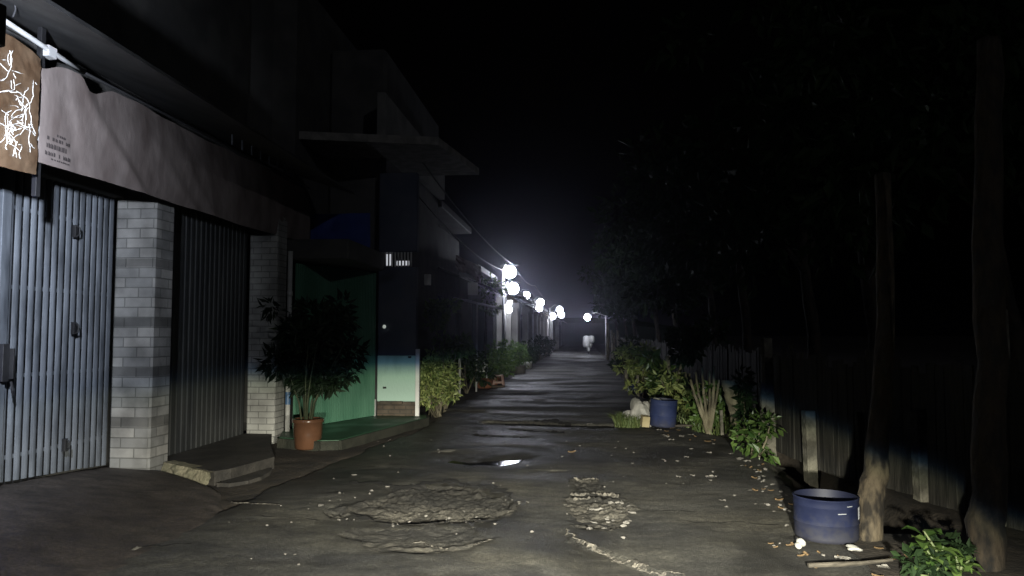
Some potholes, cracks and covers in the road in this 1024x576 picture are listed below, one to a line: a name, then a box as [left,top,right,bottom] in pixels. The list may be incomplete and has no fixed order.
pothole [345,484,519,526]
pothole [562,477,641,531]
pothole [337,525,500,554]
crack [473,419,602,438]
